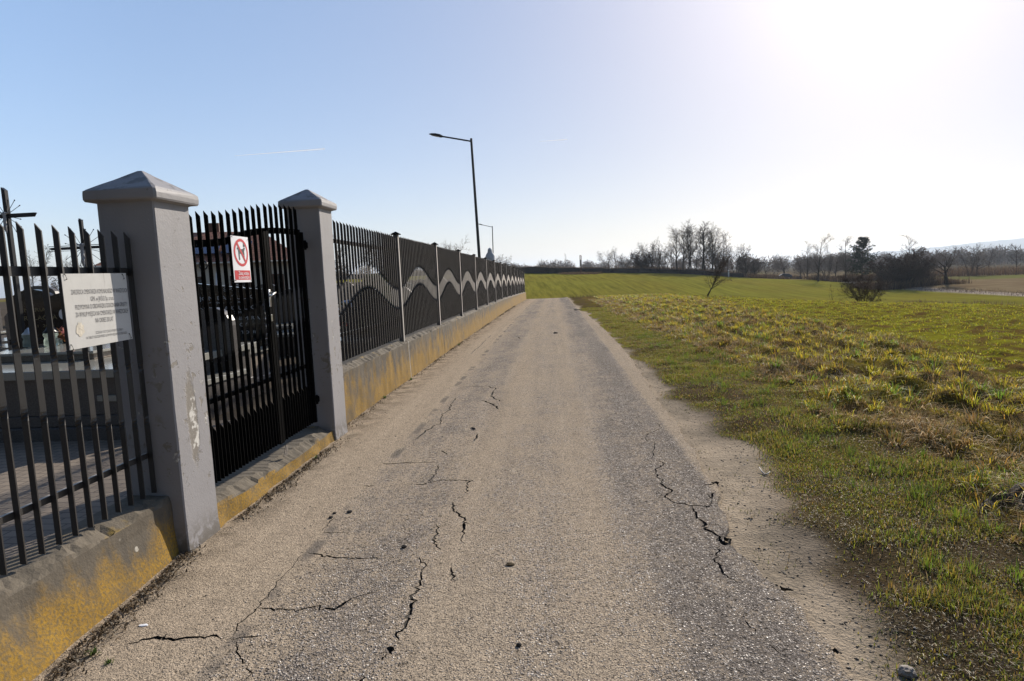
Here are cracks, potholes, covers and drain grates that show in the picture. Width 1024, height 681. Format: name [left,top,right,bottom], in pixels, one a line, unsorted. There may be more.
crack [125,635,258,681]
crack [414,386,500,440]
crack [645,425,737,582]
crack [382,451,473,660]
crack [255,592,372,612]
